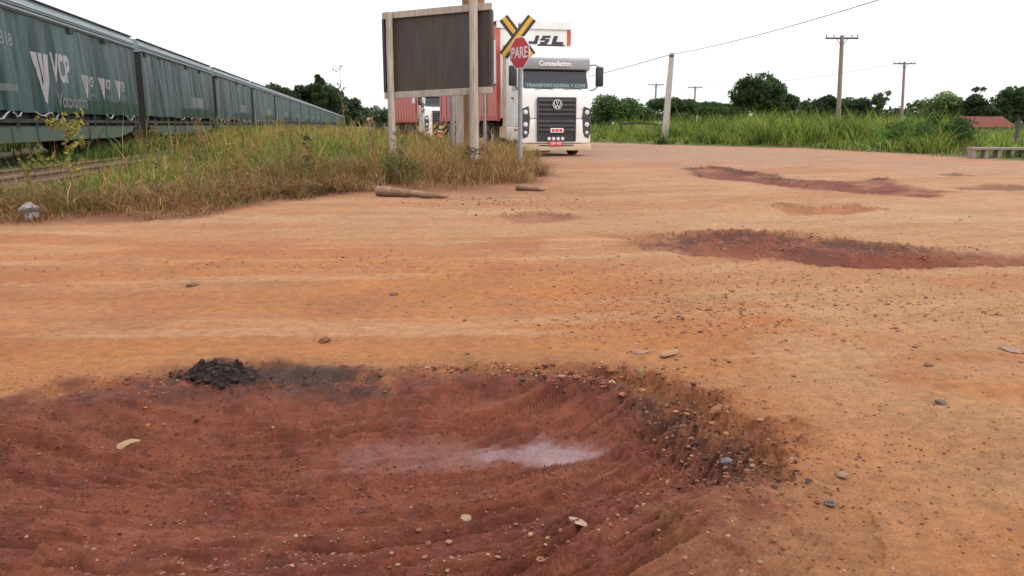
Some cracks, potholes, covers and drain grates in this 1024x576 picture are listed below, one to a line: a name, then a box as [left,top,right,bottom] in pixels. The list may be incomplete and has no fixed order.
pothole [493,210,592,225]
pothole [952,183,1024,192]
pothole [0,357,902,576]
pothole [623,228,1024,272]
pothole [676,165,959,199]
pothole [766,201,895,217]
